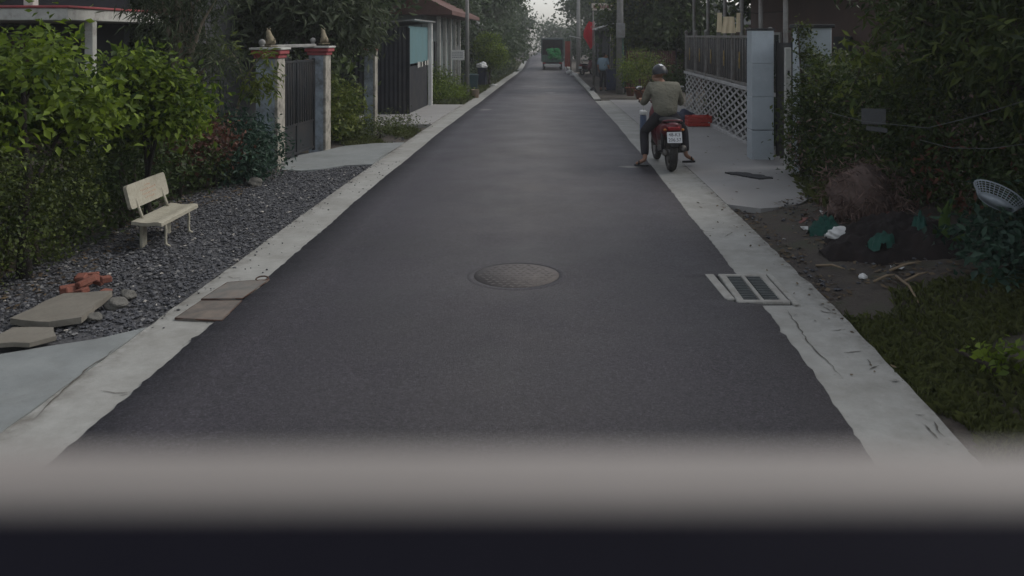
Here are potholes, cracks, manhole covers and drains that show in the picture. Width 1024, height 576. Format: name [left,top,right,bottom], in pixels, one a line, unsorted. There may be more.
crack [791,307,879,376]
drain grate [705,274,800,306]
manhole cover [467,262,567,290]
